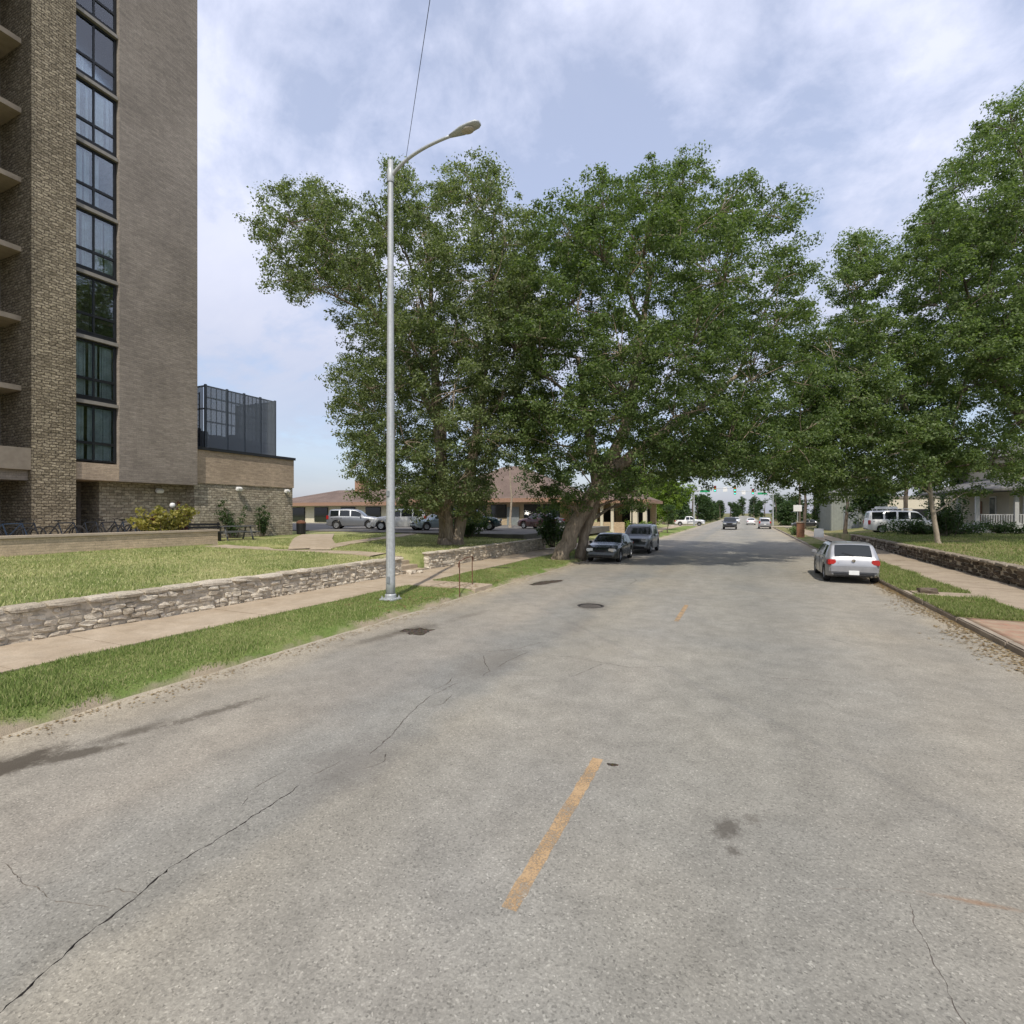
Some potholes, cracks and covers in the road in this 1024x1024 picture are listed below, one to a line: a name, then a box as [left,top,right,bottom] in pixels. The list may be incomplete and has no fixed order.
crack [827,887,1013,1024]
crack [367,642,540,768]
crack [0,761,341,1013]
